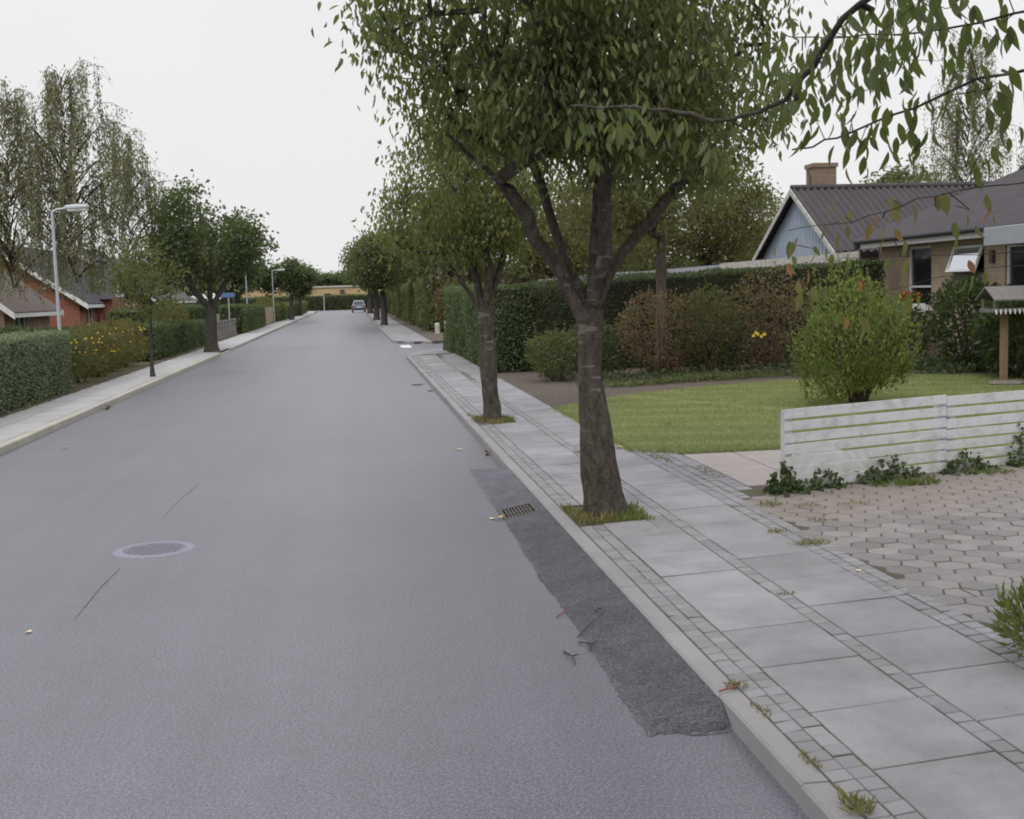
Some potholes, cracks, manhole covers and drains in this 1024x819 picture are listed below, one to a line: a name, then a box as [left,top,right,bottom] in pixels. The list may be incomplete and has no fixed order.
manhole cover [112,541,196,559]
drain grate [497,502,540,520]
